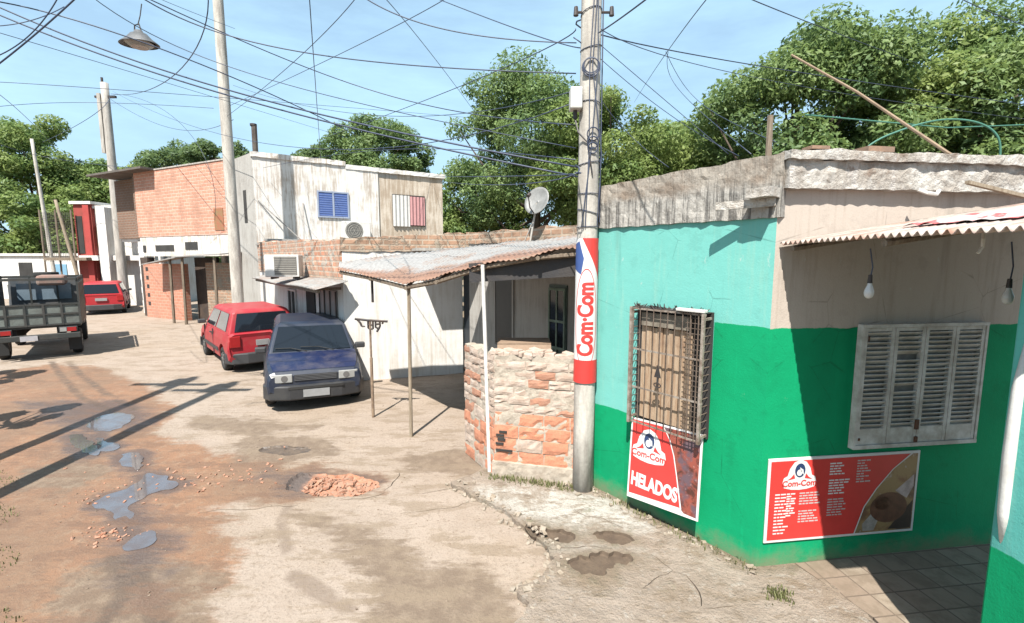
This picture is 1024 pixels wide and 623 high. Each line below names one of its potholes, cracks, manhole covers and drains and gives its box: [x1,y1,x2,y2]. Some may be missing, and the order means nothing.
pothole [567,551,634,576]
crack [643,554,731,609]
pothole [525,524,575,543]
pothole [592,531,635,545]
pothole [286,472,380,497]
pothole [258,445,311,456]
